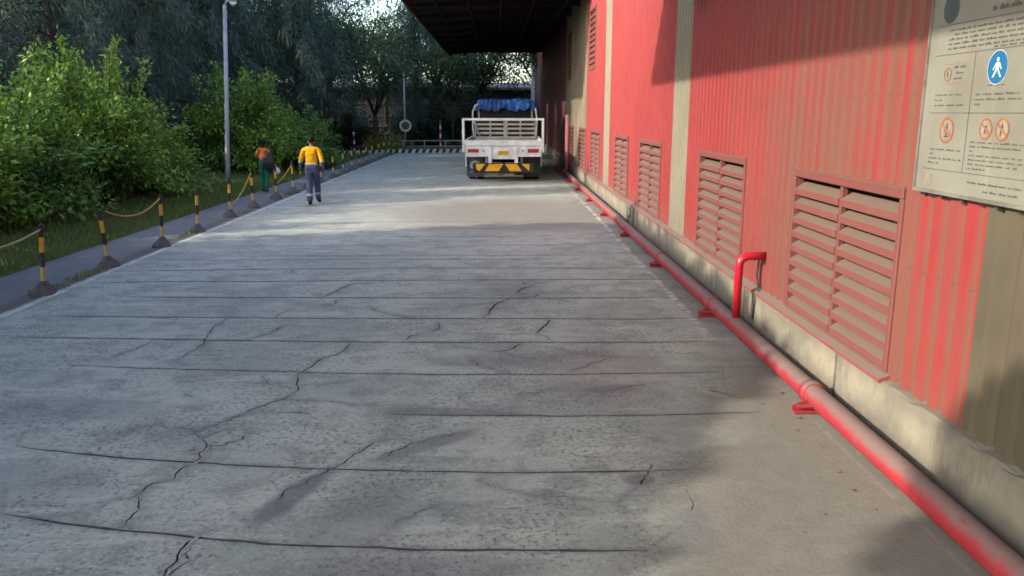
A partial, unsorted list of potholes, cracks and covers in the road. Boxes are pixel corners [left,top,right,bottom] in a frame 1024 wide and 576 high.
crack [279,432,466,502]
crack [95,343,424,576]
crack [369,280,621,373]
